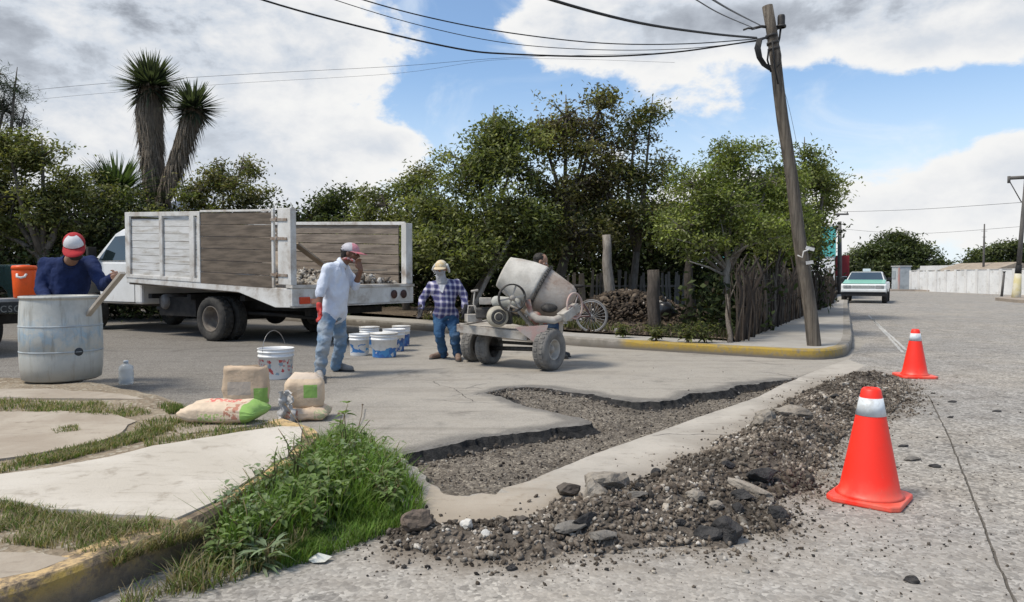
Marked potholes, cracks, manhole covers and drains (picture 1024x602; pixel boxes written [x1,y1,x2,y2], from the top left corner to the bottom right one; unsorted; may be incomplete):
pothole [394,378,797,496]
crack [418,379,485,403]
